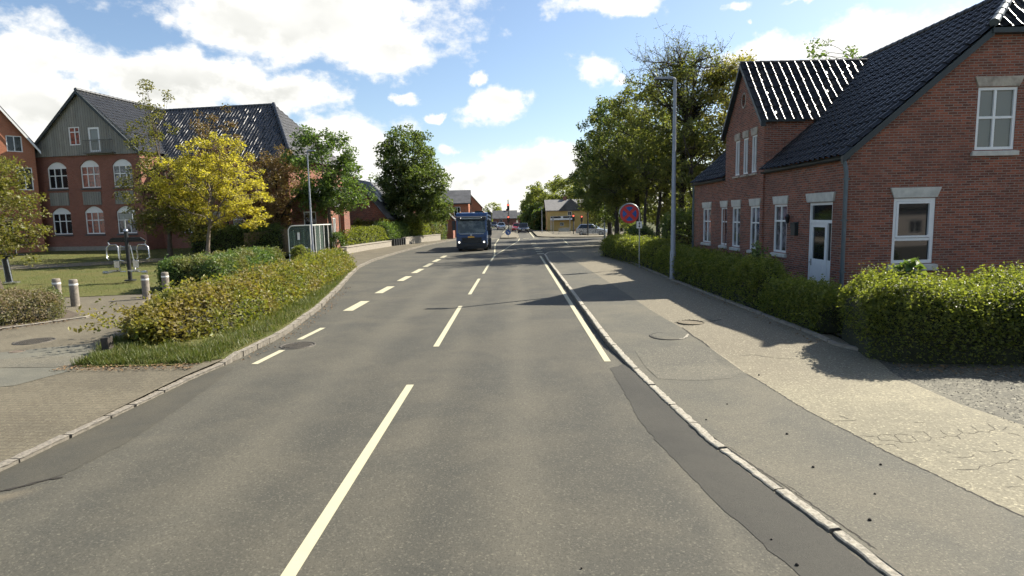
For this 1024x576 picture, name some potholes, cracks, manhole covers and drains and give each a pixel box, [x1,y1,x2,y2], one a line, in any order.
manhole cover [649,332,689,340]
manhole cover [12,337,56,345]
crack [863,422,1023,487]
